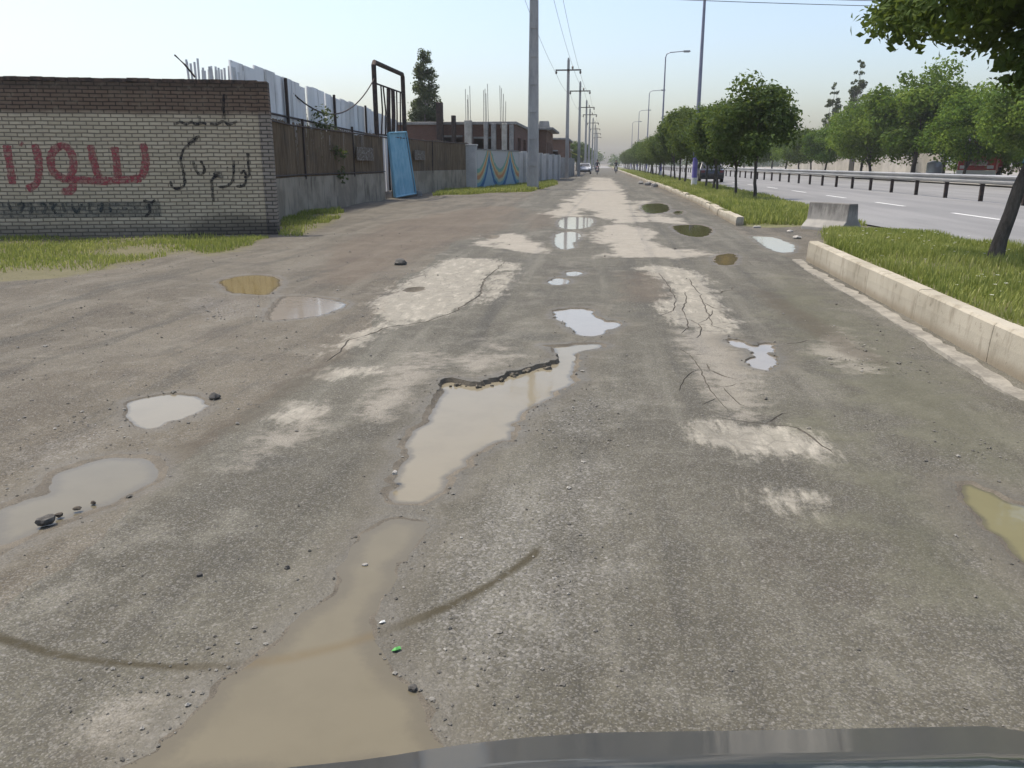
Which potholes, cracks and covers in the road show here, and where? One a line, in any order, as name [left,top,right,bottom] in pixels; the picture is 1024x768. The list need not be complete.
pothole [380,342,608,506]
pothole [119,516,445,768]
pothole [752,236,797,254]
pothole [0,454,169,556]
crack [596,258,833,453]
pothole [551,307,623,337]
pothole [725,337,779,371]
pothole [121,393,211,429]
crack [326,260,507,362]
pothole [553,231,582,249]
pothole [216,274,284,295]
pothole [556,217,595,229]
